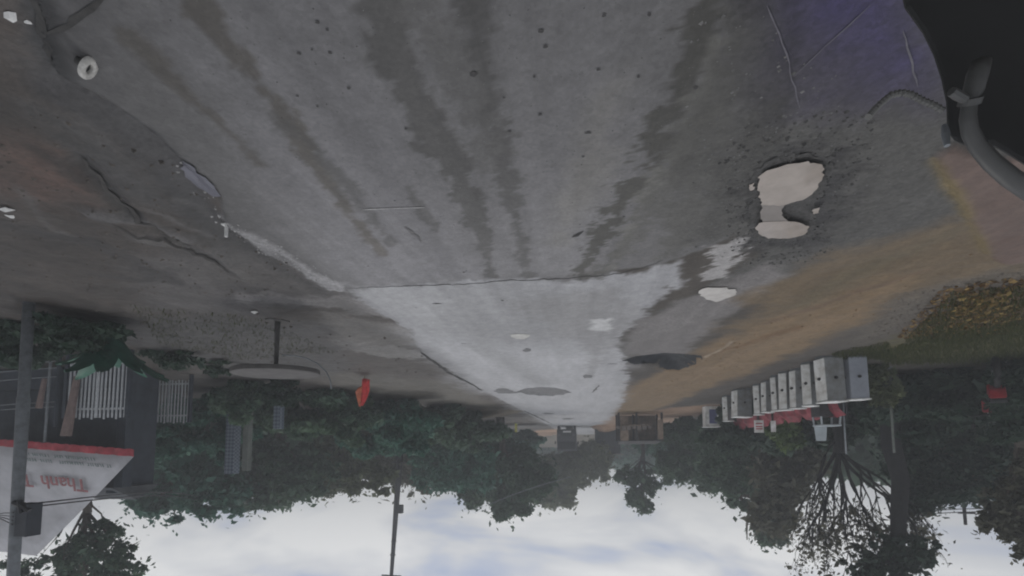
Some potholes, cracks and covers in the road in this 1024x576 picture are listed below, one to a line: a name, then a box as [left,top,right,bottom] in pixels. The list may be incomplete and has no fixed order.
crack [903,31,918,87]
pothole [746,152,835,242]
pothole [517,387,571,396]
crack [767,6,868,108]
pothole [623,353,703,370]
crack [420,343,481,390]
